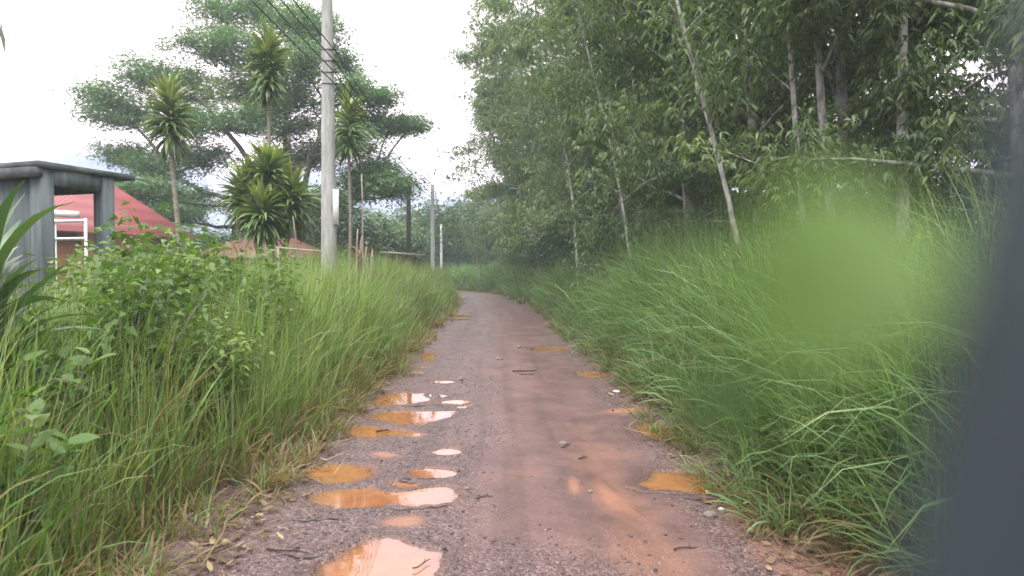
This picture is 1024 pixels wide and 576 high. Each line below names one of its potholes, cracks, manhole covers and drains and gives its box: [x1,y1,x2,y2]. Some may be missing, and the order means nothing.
pothole [296,482,473,511]
pothole [378,477,433,489]
pothole [337,423,436,440]
pothole [298,531,459,576]
pothole [369,513,439,532]
pothole [295,459,386,489]
pothole [567,371,613,379]
pothole [364,390,441,408]
pothole [396,464,469,482]
pothole [420,444,472,458]
pothole [434,397,478,406]
pothole [358,408,463,427]
